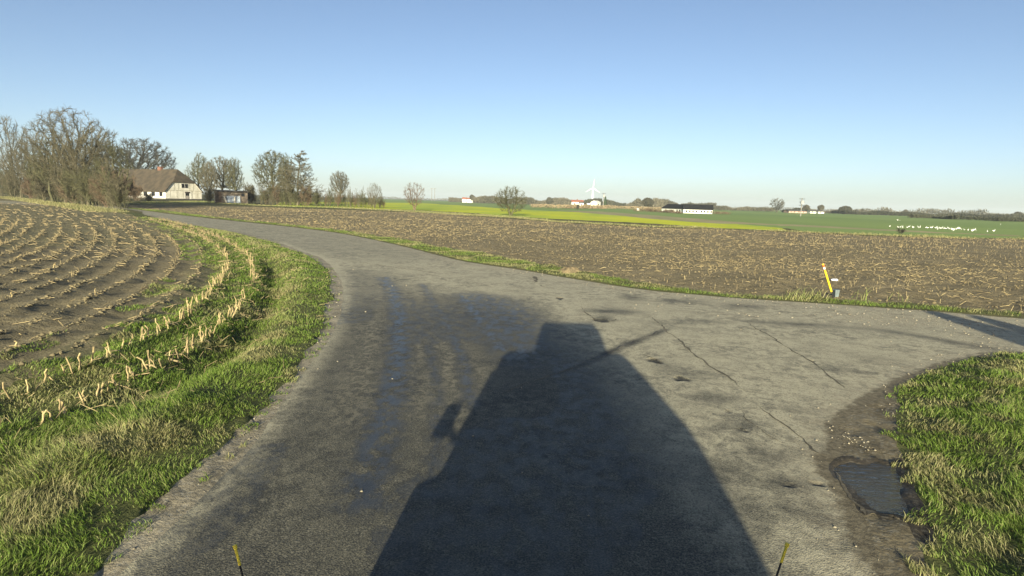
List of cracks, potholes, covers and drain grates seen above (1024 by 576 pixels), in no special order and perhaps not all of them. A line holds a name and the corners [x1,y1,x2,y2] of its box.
pothole [829,456,937,545]
crack [750,324,845,388]
crack [741,407,822,455]
crack [504,317,742,393]
